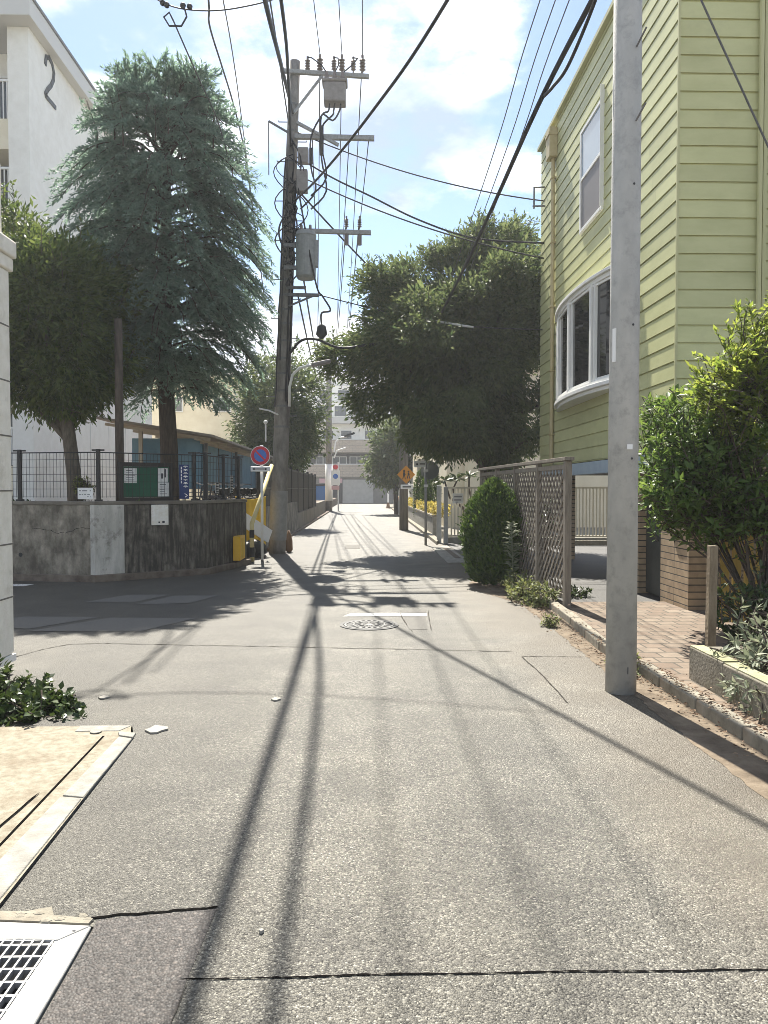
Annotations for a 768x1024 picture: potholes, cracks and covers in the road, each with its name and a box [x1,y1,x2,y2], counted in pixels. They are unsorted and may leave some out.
crack [91,906,218,919]
drain grate [0,906,94,1024]
manhole cover [340,619,399,631]
